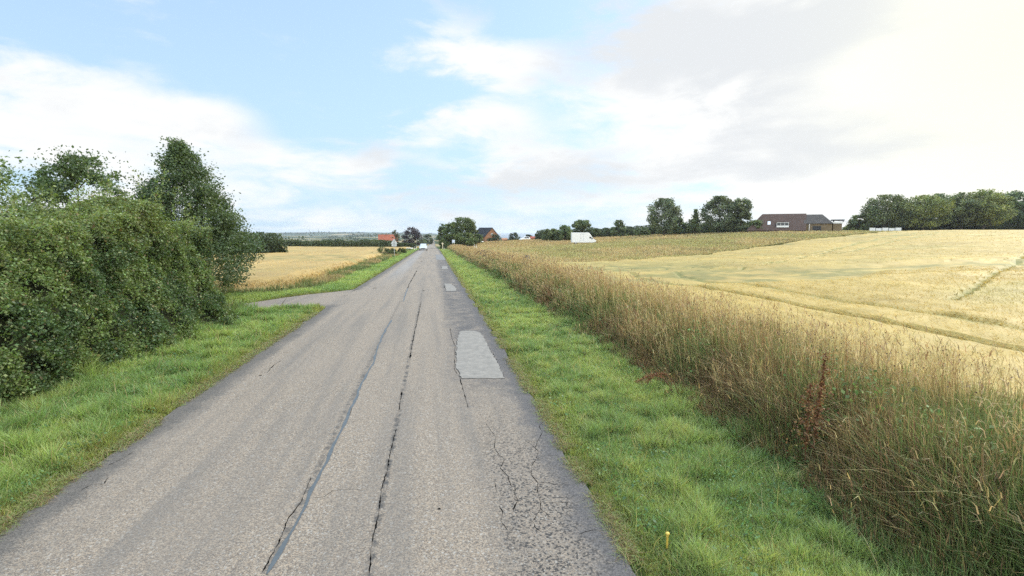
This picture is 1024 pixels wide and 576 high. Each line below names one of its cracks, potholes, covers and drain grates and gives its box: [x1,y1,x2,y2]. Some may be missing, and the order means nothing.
crack [250,320,403,574]
crack [486,423,592,543]
crack [403,271,421,358]
